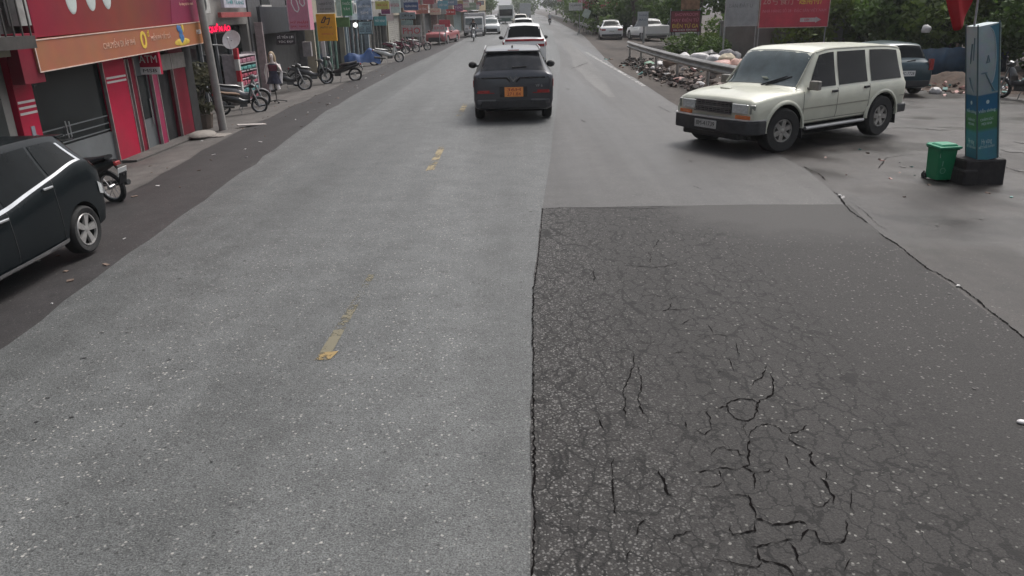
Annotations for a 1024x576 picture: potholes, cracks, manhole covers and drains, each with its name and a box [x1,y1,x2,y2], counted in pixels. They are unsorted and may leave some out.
crack [804,166,1024,338]
crack [685,366,855,575]
crack [622,339,656,417]
crack [658,470,676,497]
